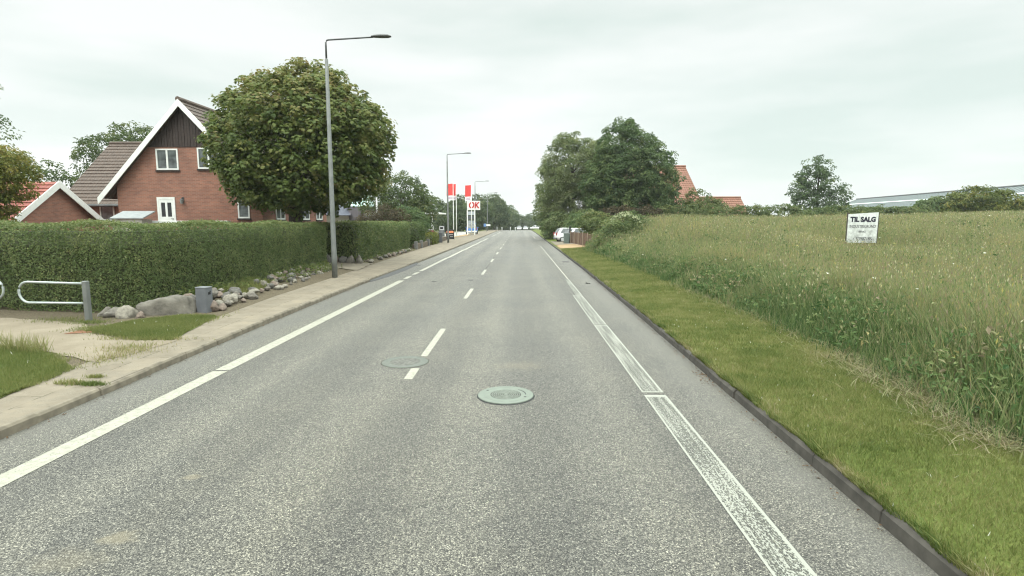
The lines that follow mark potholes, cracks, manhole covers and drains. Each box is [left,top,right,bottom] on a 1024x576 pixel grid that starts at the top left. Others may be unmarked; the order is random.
manhole cover [381,356,429,368]
manhole cover [477,386,535,405]
